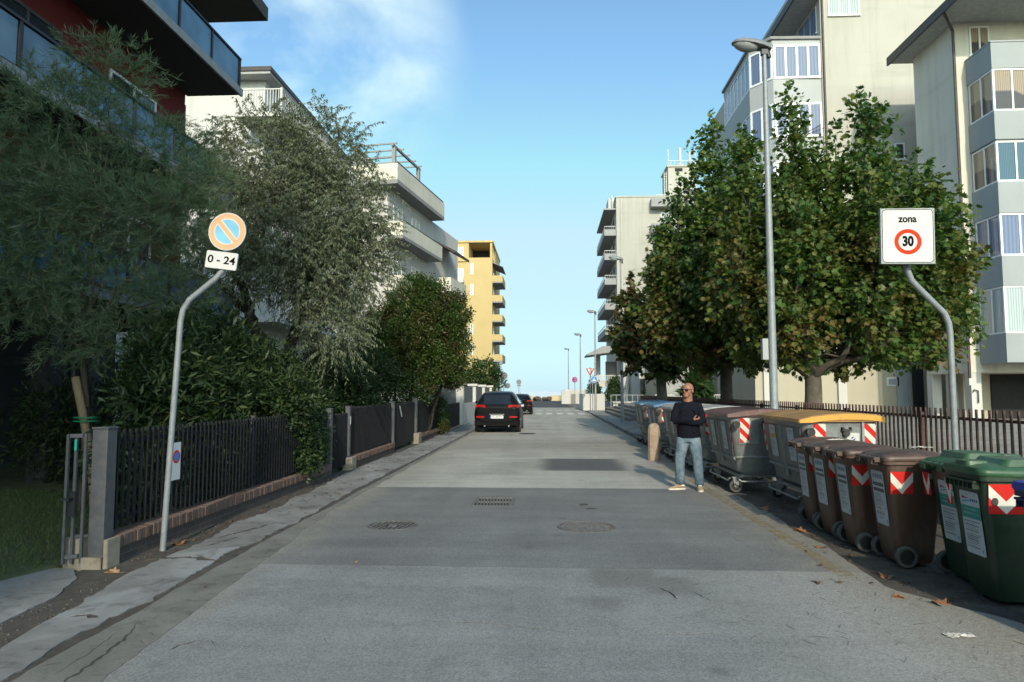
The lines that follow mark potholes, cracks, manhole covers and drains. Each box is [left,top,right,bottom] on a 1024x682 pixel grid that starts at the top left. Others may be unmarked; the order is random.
drain grate [470,497,515,506]
manhole cover [367,520,418,530]
manhole cover [557,521,615,533]
